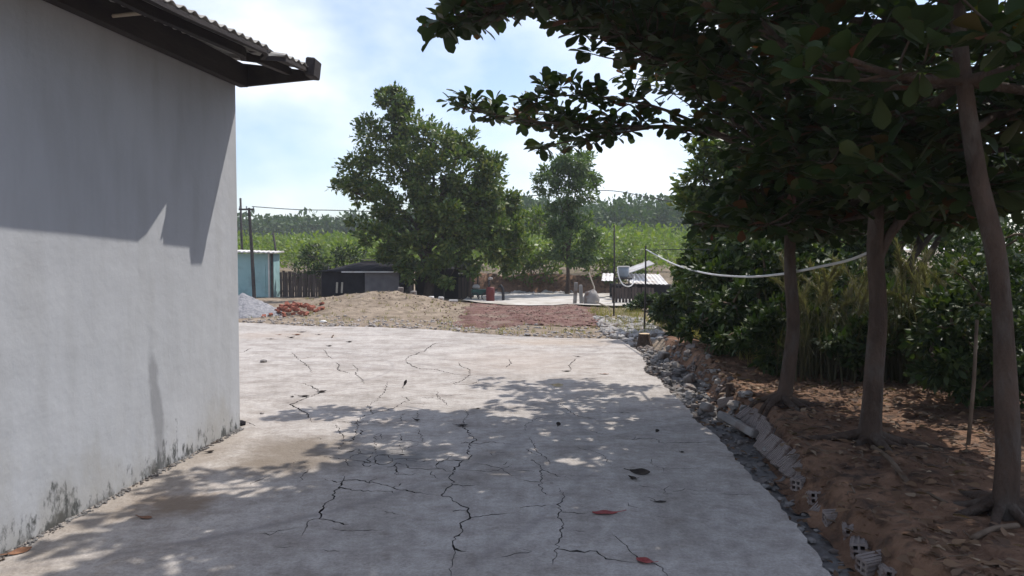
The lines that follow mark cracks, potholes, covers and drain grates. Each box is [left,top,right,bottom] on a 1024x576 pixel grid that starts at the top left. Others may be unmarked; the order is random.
crack [261,342,668,576]
